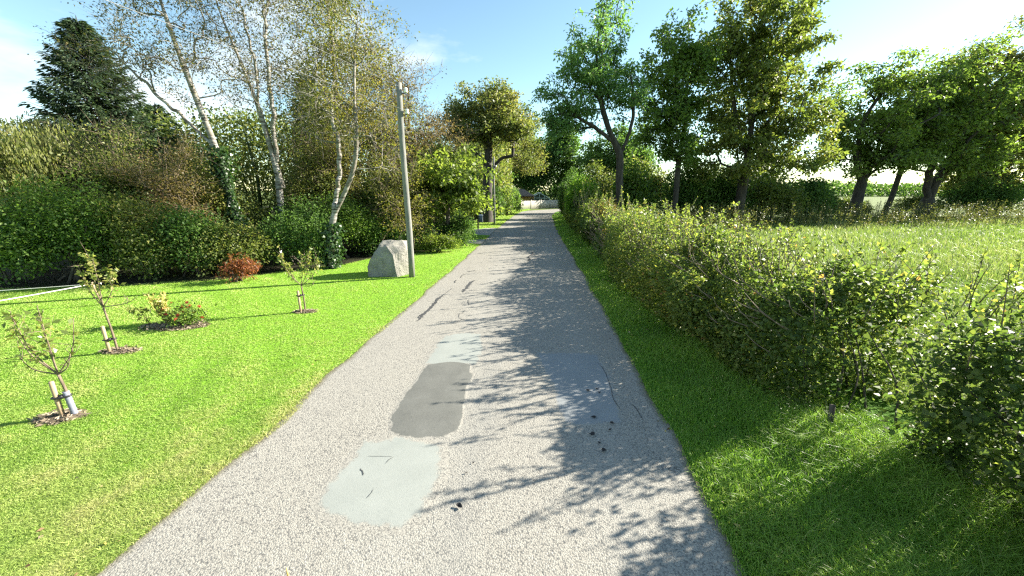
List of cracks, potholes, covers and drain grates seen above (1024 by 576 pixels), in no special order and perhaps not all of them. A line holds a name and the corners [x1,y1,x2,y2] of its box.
crack [416,270,476,324]
